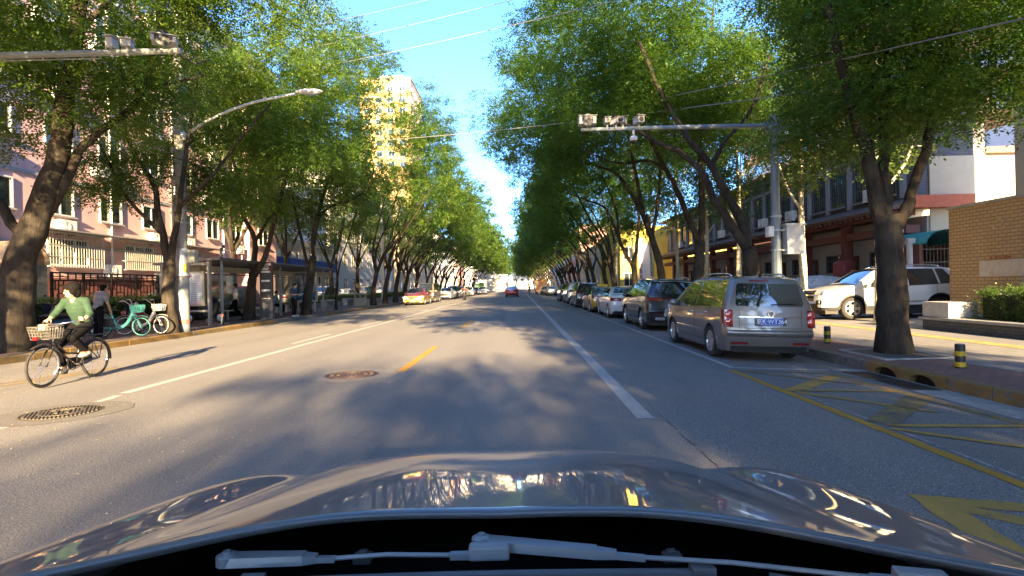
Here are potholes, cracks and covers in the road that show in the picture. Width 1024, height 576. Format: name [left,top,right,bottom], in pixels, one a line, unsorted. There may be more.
manhole cover [0,401,134,427]
manhole cover [302,369,398,382]
